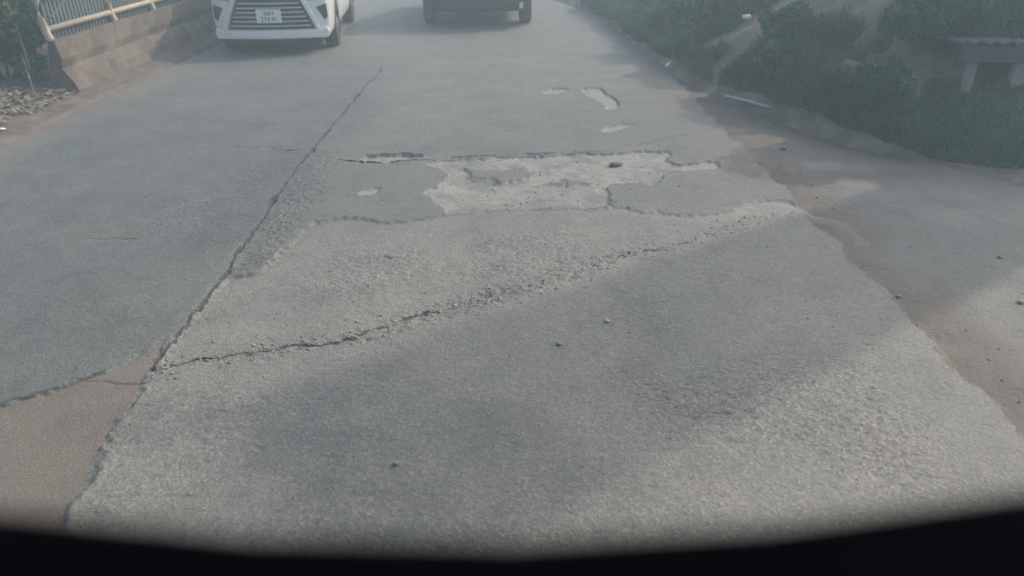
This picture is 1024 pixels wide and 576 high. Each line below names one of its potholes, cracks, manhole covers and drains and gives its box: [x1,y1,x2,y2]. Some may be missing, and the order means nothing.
pothole [601,123,636,132]
pothole [580,87,620,110]
pothole [422,149,722,217]
crack [126,68,438,372]
